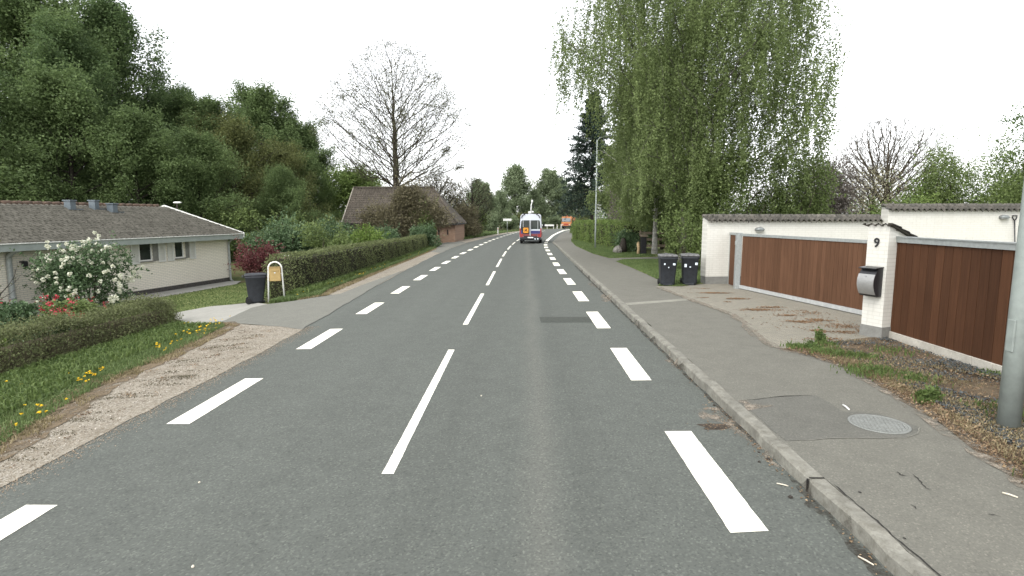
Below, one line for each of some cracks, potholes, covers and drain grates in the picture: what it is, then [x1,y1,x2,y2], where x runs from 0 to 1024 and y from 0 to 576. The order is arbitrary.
manhole cover [847,414,912,434]
